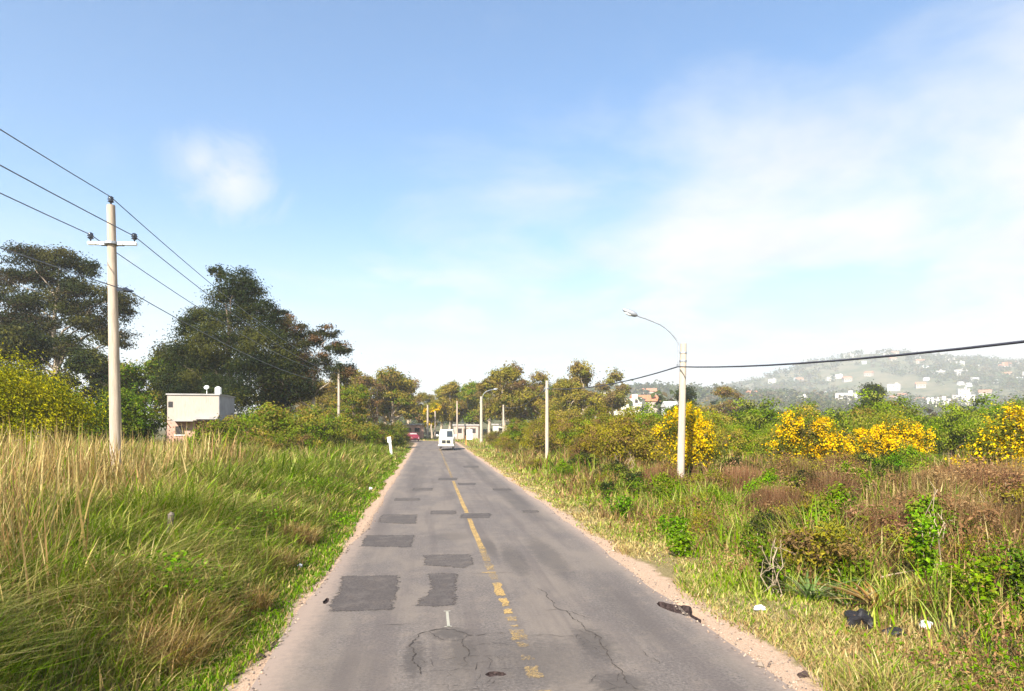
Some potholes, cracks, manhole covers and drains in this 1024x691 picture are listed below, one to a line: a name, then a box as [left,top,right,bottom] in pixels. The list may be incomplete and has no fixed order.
crack [386,624,528,691]
crack [542,590,637,690]
